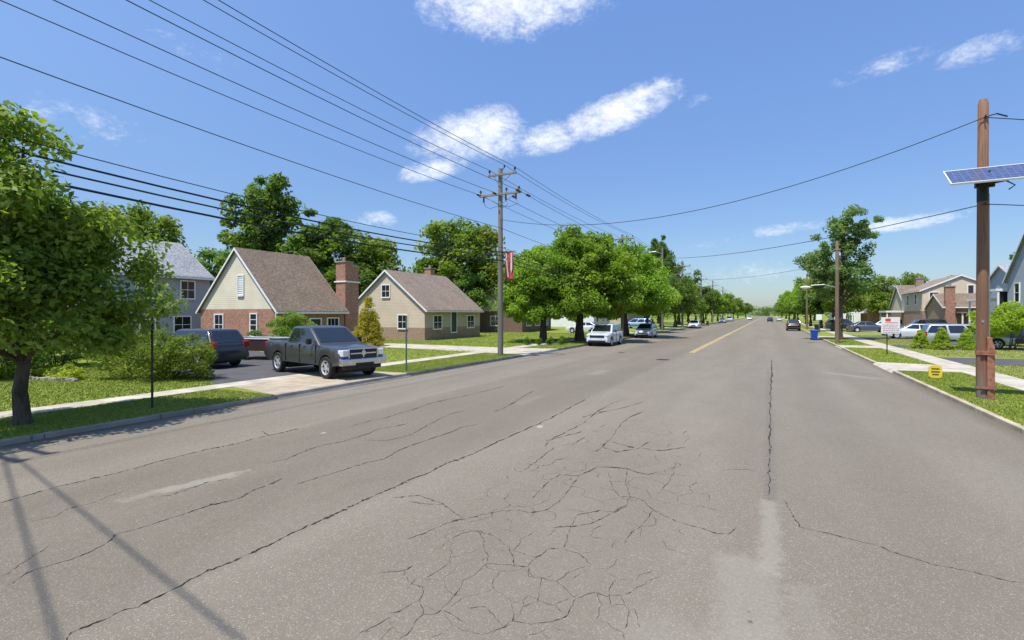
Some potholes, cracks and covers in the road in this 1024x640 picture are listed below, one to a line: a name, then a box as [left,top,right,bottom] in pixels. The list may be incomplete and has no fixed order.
crack [1,429,296,521]
crack [66,386,736,640]
crack [1,479,281,586]
crack [786,502,1021,583]
